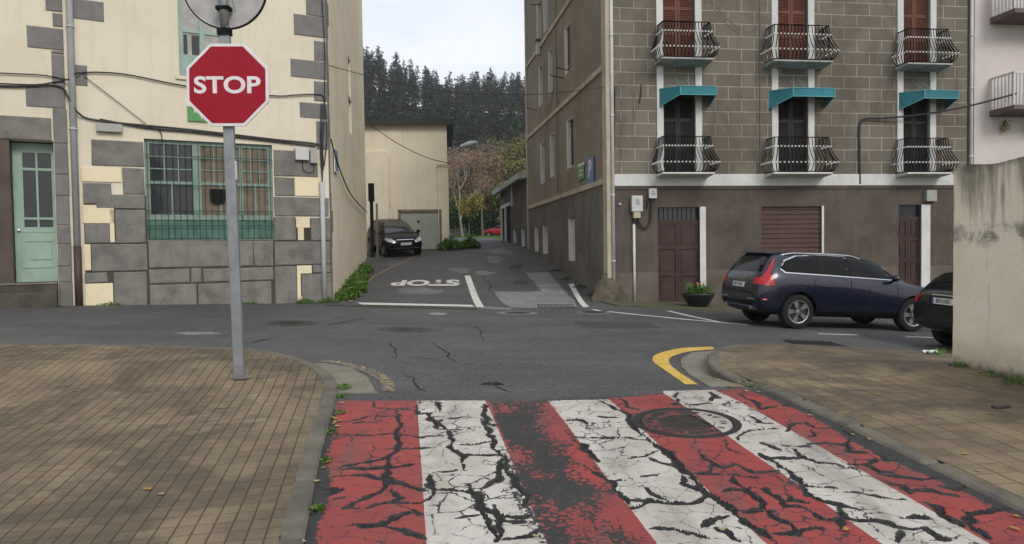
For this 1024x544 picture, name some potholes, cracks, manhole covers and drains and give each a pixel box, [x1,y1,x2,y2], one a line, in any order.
manhole cover [632,408,742,438]
crack [566,393,1011,542]
crack [320,342,538,542]
